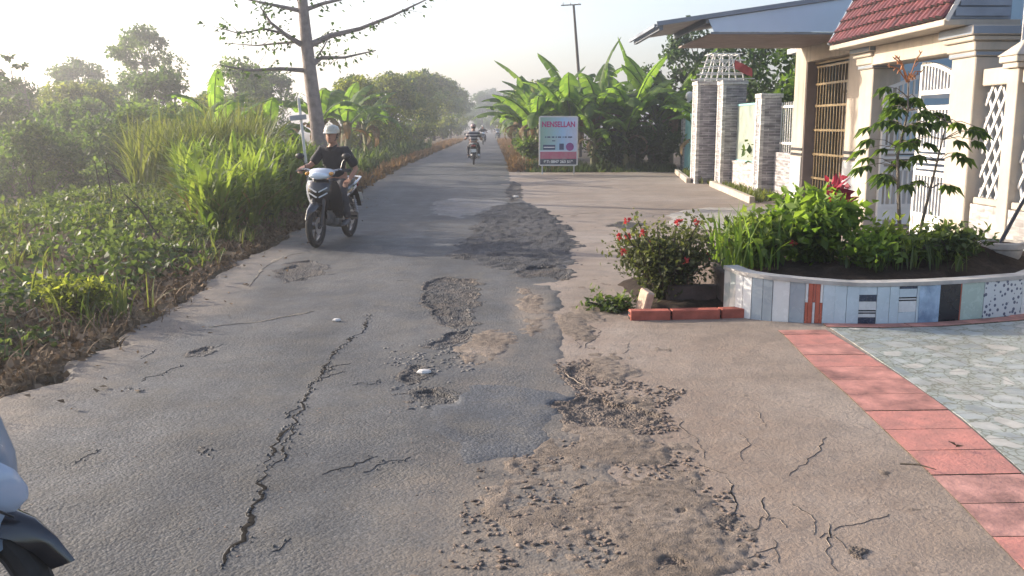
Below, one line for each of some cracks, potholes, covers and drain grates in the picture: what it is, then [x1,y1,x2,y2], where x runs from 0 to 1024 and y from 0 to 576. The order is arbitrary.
crack [323,455,412,475]
pothole [183,346,218,357]
pothole [395,364,436,385]
pothole [418,277,487,329]
pothole [391,387,463,406]
pothole [504,181,524,202]
crack [679,411,889,571]
pothole [553,362,596,388]
pothole [272,260,333,283]
crack [198,313,385,569]
